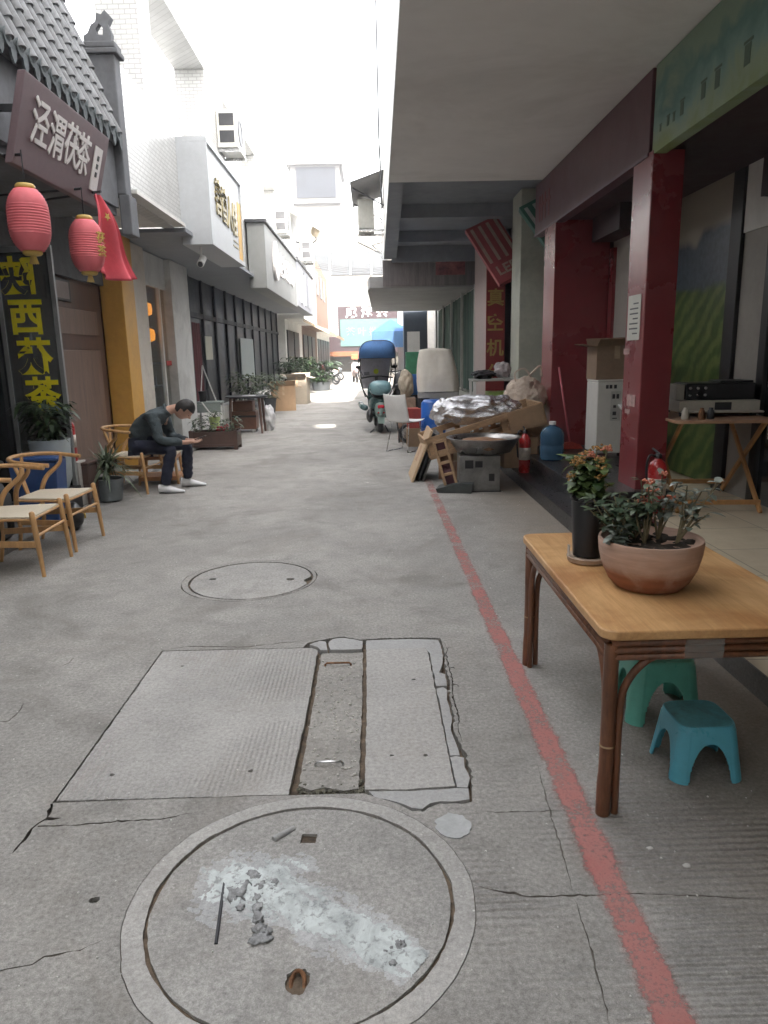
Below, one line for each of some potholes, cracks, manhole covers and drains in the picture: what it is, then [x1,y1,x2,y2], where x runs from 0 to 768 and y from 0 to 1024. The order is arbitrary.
manhole cover [120,796,476,1024]
manhole cover [181,560,317,601]
crack [445,644,463,743]
crack [0,939,104,971]
crack [475,885,761,900]
crack [13,805,195,852]
